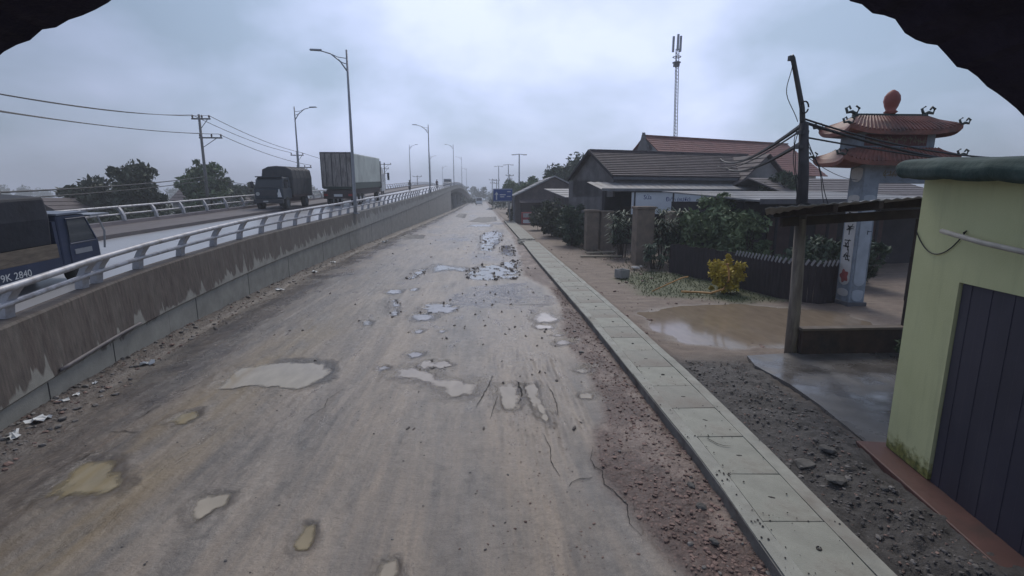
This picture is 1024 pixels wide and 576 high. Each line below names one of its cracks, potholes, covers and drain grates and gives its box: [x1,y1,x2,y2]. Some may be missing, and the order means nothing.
pothole [48,461,120,497]
pothole [535,313,557,322]
pothole [193,494,230,519]
pothole [465,263,521,280]
pothole [412,312,433,321]
pothole [219,358,338,389]
pothole [174,412,198,424]
pothole [480,231,504,251]
pothole [386,365,477,397]
pothole [525,383,554,422]
pothole [420,301,458,313]
pothole [498,384,520,410]
